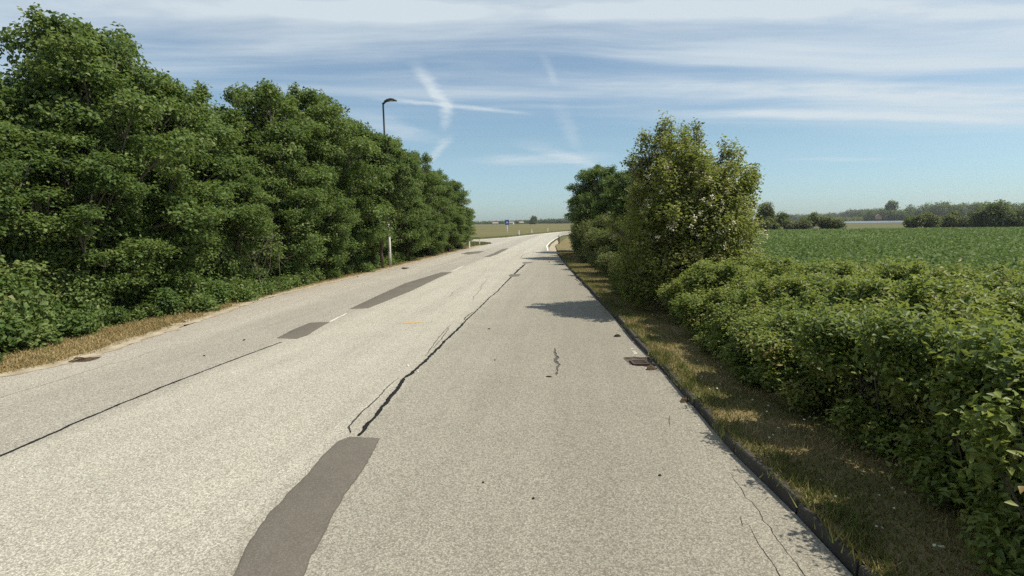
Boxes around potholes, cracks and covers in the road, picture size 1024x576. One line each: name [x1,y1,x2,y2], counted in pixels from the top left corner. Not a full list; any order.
crack [729,472,805,576]
